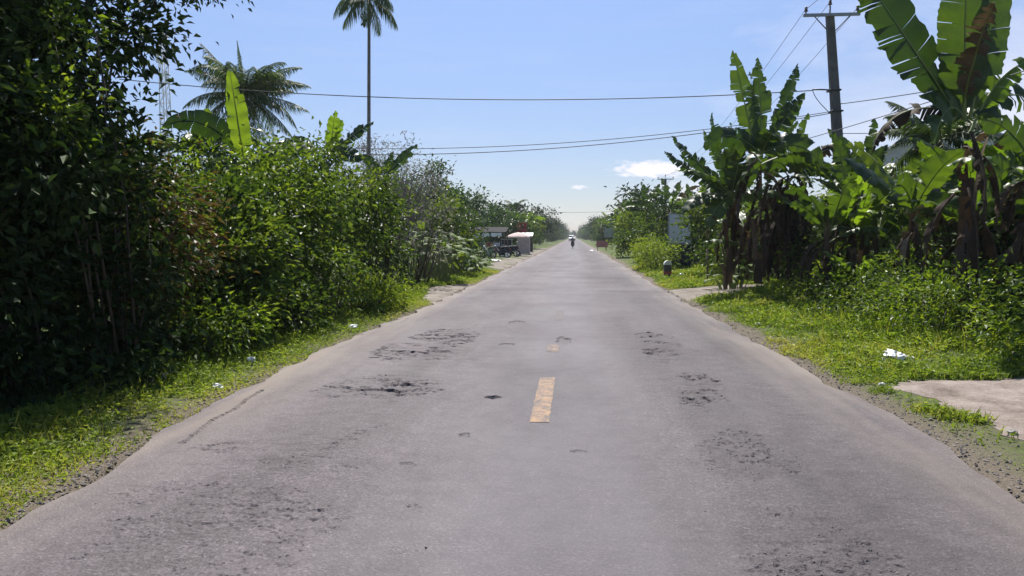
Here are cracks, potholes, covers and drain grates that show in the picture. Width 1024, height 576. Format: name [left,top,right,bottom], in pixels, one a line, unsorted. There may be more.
pothole [633,331,687,364]
pothole [366,327,481,363]
pothole [288,372,447,401]
